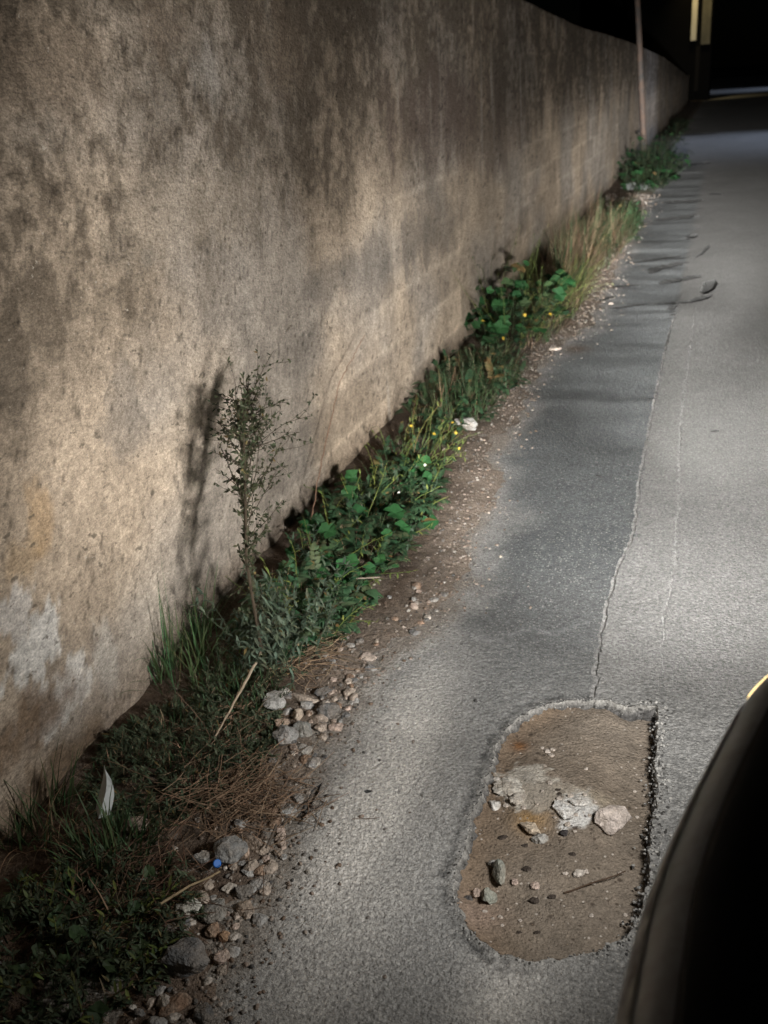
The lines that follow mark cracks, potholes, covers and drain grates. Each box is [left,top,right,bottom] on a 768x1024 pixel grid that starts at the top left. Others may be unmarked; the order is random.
crack [589,193,722,698]
pothole [448,698,674,965]
